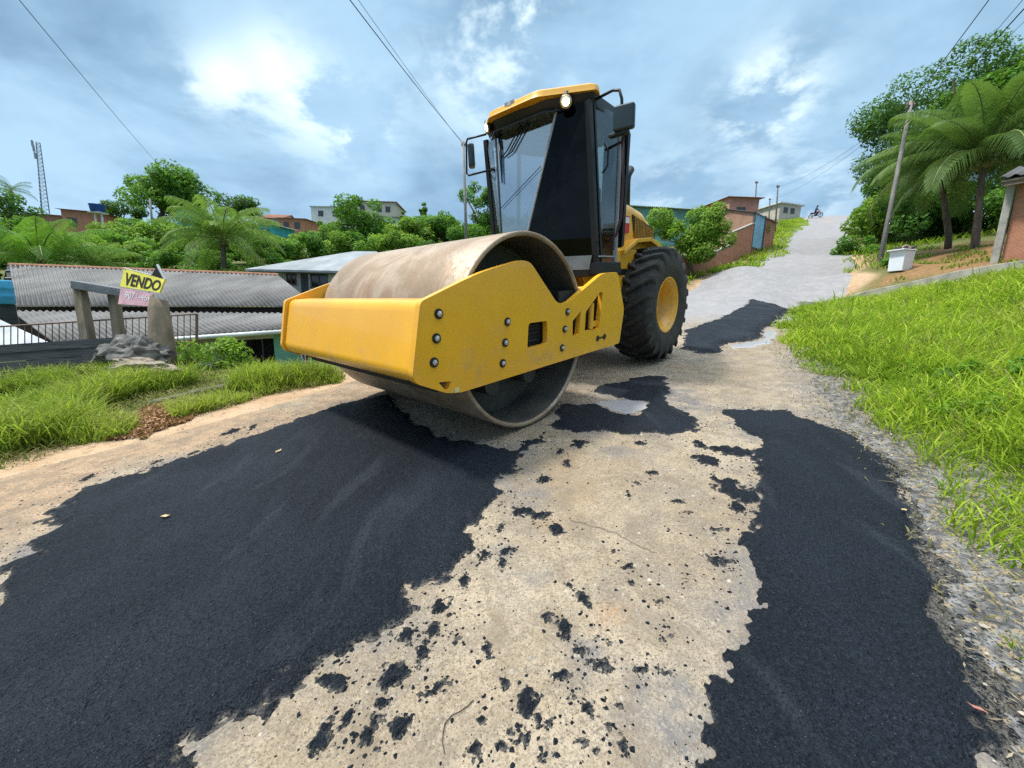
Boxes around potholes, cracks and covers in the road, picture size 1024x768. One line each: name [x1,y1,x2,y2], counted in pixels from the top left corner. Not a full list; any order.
crack [571,520,656,553]
